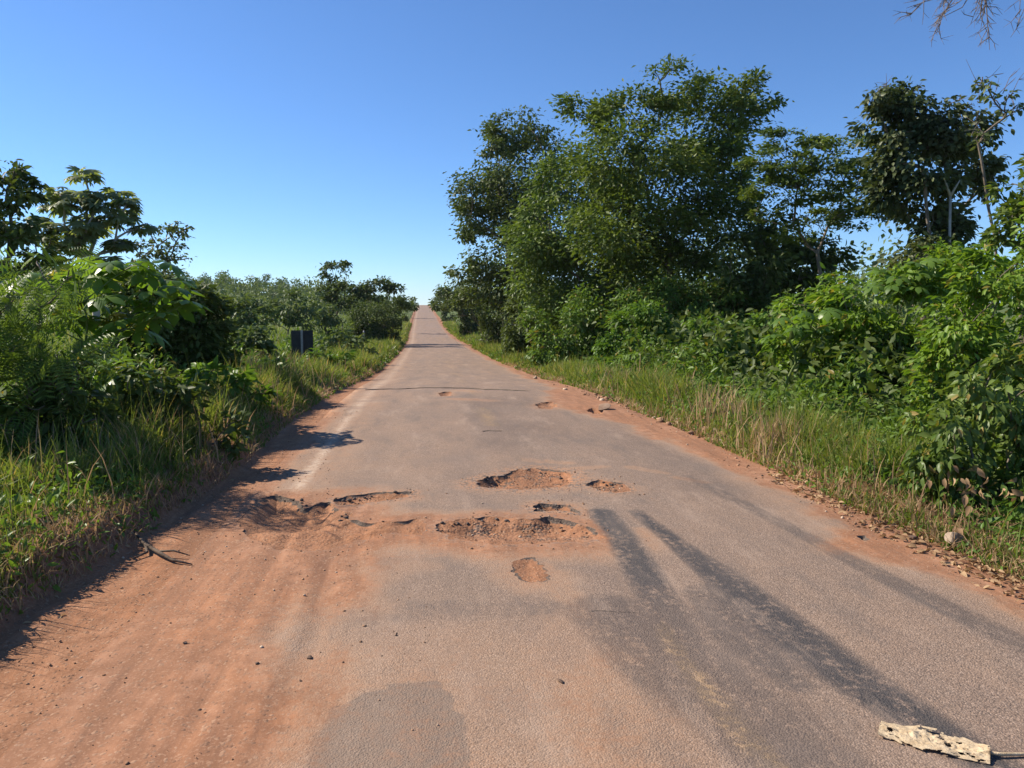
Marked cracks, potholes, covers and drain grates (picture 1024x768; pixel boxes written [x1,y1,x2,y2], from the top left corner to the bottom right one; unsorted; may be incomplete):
pothole [333,491,413,505]
pothole [511,557,551,583]
pothole [238,495,427,551]
pothole [435,516,607,545]
pothole [533,503,580,513]
pothole [585,480,630,493]
pothole [476,468,573,490]
